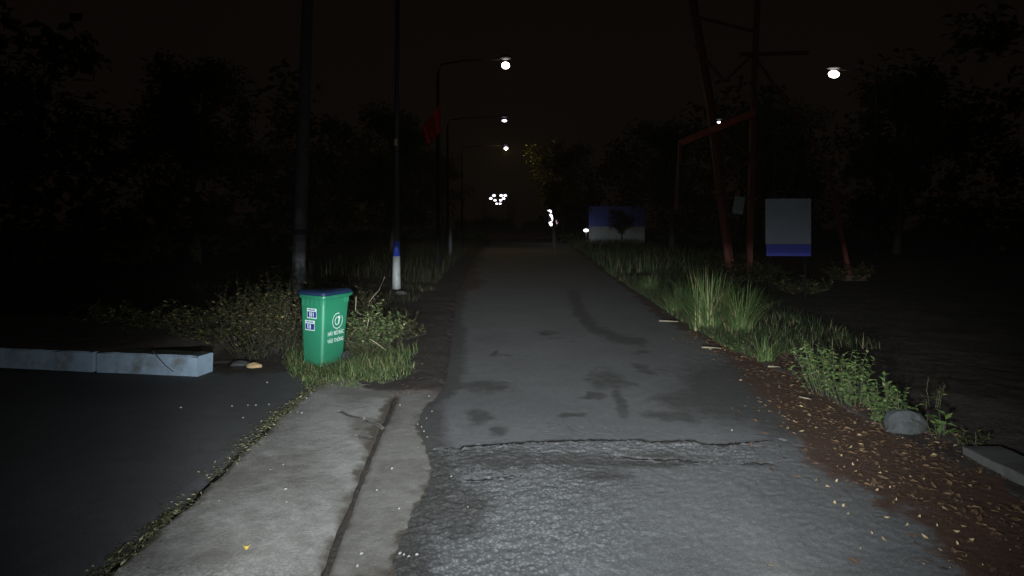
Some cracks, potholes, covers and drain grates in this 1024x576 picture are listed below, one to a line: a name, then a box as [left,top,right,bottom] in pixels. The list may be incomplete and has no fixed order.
crack [338,411,386,439]
